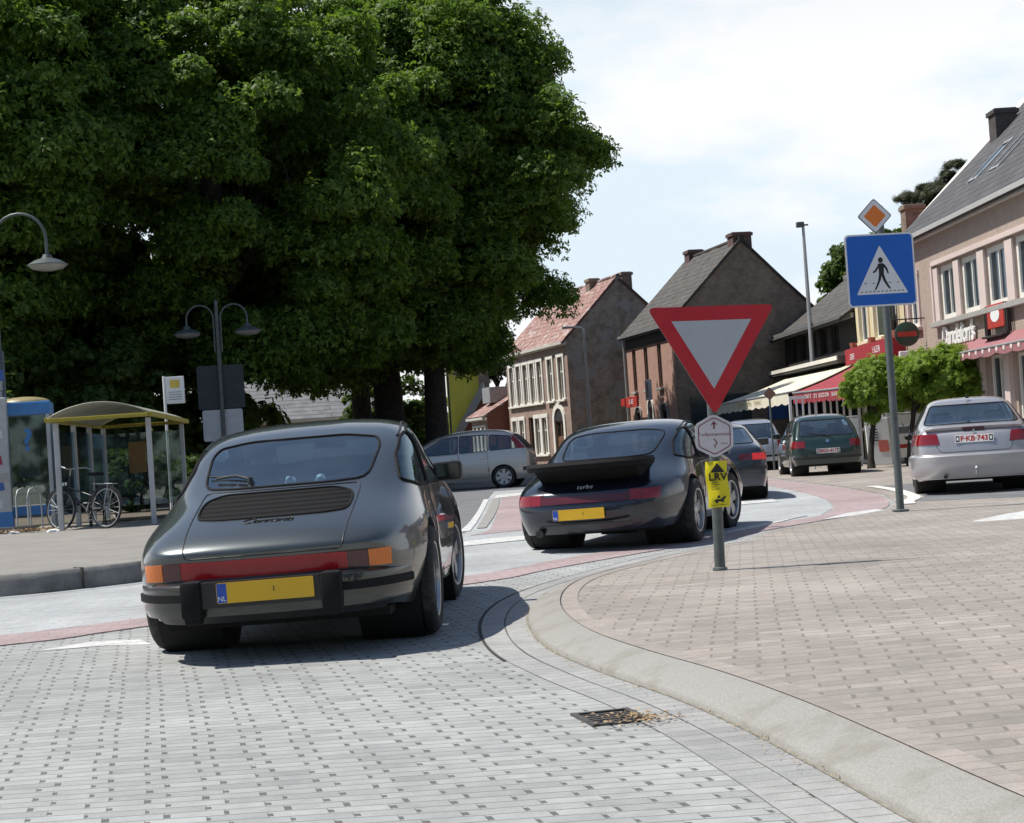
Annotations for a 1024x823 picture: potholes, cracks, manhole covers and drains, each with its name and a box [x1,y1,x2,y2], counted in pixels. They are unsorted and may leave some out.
drain grate [570,707,653,727]
